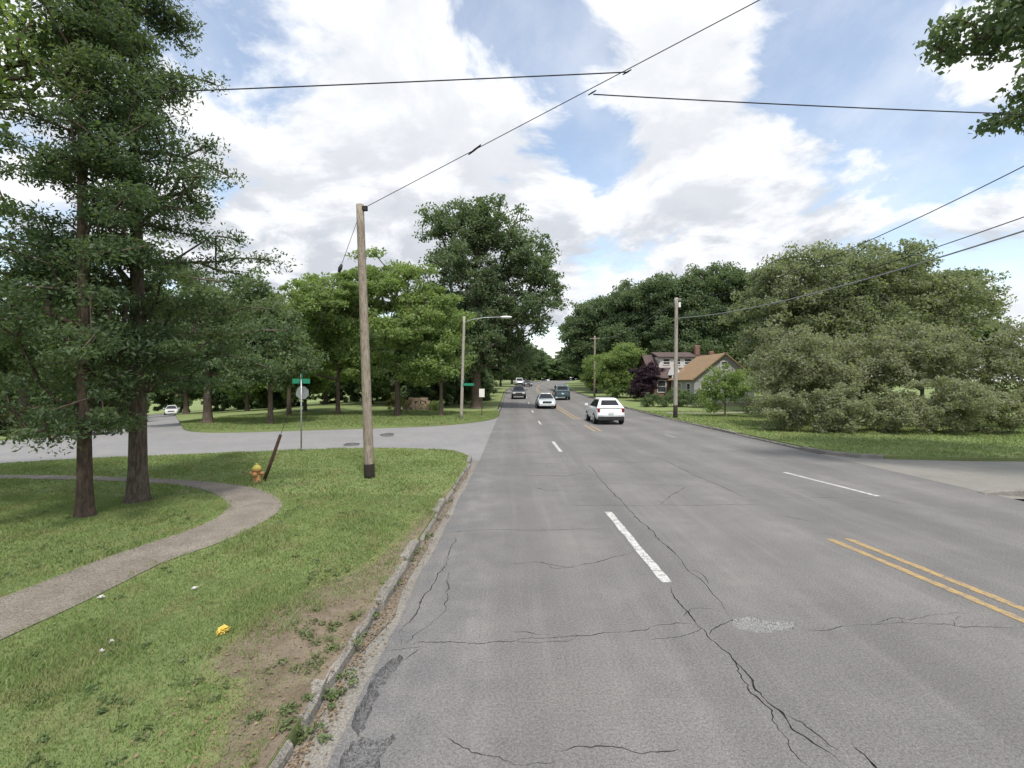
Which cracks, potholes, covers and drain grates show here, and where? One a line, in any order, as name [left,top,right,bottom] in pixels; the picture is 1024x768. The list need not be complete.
crack [414,452,849,768]
crack [804,612,1003,631]
